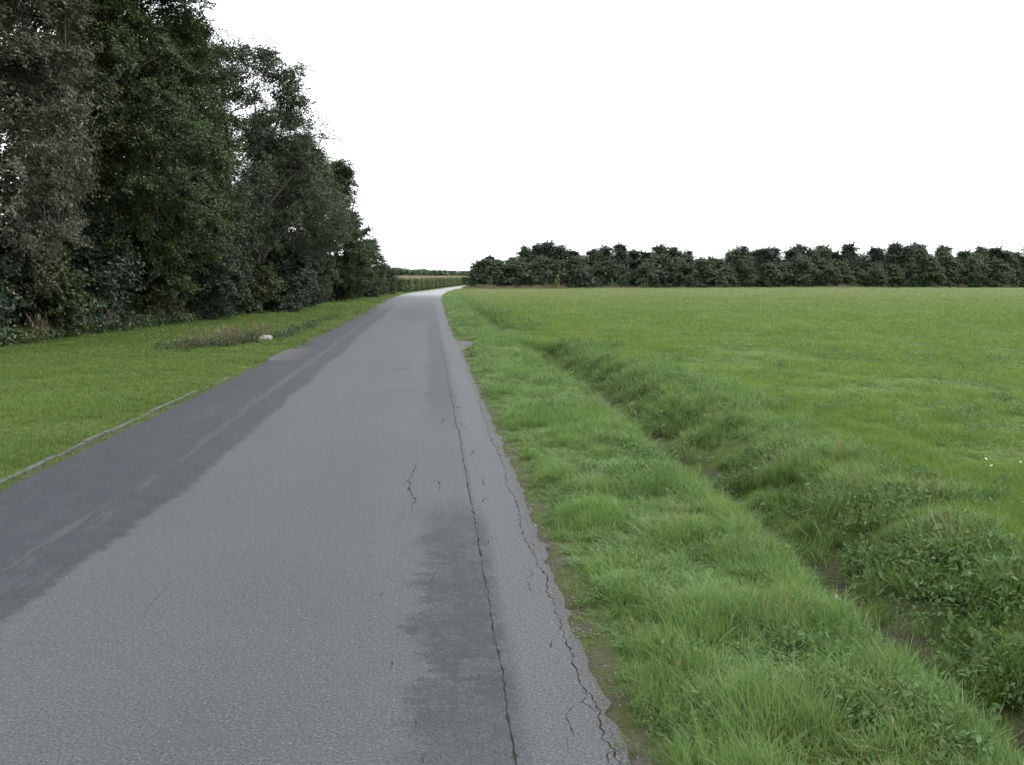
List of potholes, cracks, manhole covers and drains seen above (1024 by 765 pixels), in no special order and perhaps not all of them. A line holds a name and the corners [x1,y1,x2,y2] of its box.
crack [477,401,621,765]
crack [407,464,417,512]
